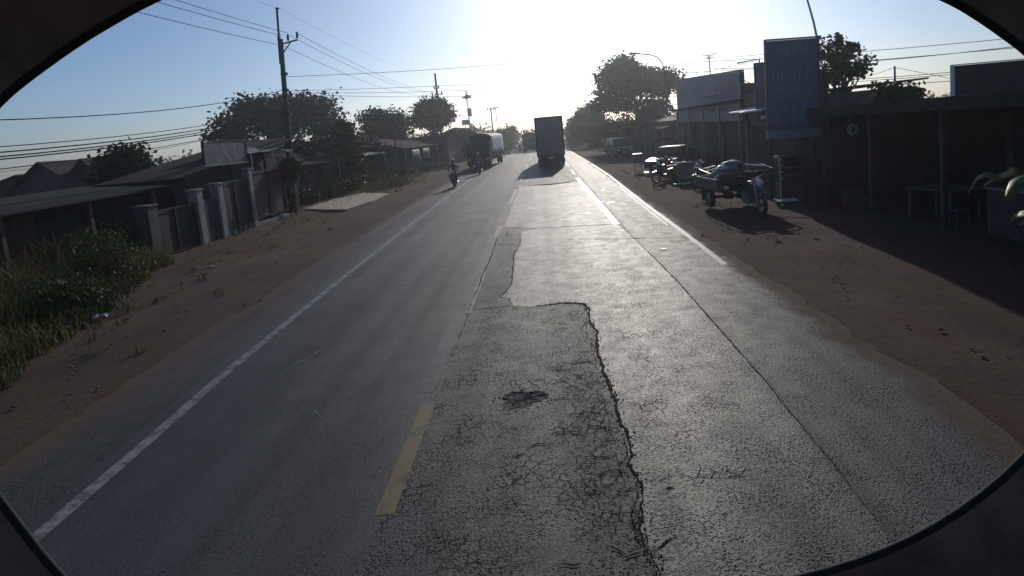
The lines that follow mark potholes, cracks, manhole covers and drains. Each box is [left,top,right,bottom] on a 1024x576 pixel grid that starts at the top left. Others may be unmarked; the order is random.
pothole [491,387,552,411]
